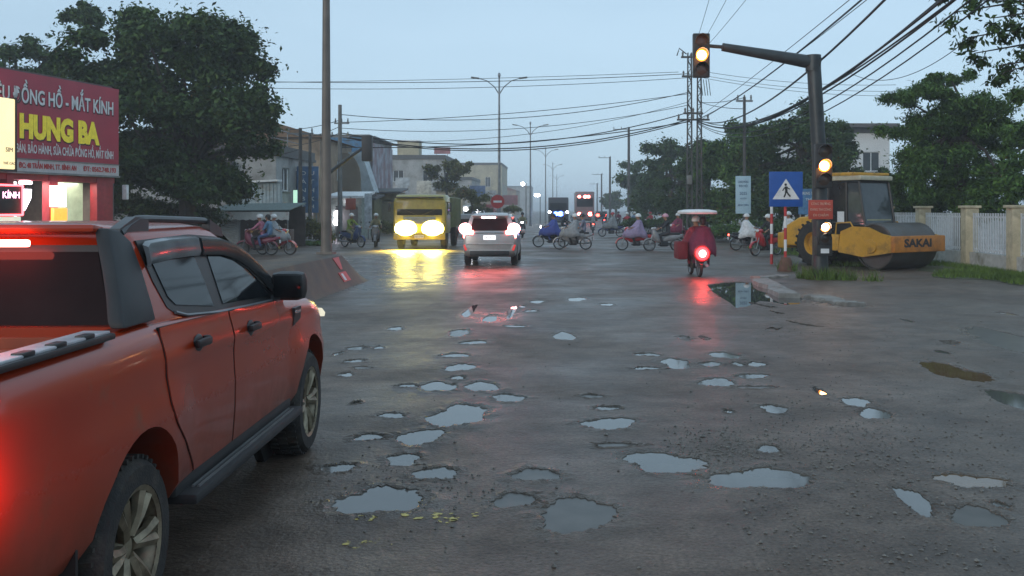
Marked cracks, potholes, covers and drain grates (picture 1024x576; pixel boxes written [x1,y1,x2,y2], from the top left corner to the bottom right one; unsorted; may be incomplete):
pothole [319,463,356,473]
pothole [704,467,817,488]
pothole [622,452,709,473]
pothole [424,403,488,427]
pothole [386,453,422,466]
pothole [552,331,576,340]
pothole [932,473,1011,488]
pothole [394,429,446,446]
pothole [420,381,458,391]
pothole [541,496,619,534]
pothole [578,417,636,430]
pothole [511,467,560,480]
